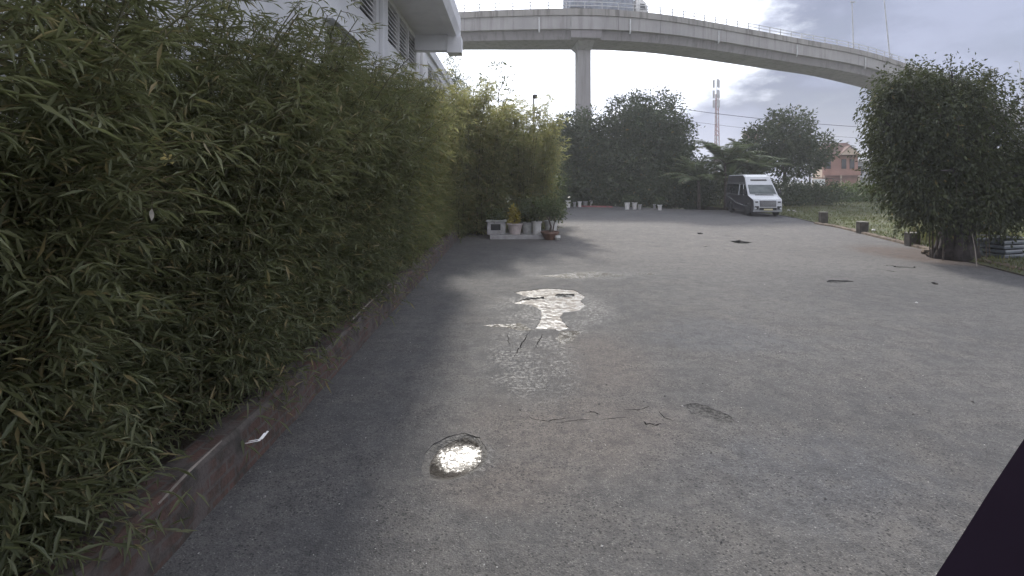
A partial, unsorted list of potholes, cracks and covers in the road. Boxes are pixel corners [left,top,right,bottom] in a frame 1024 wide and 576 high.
pothole [514,288,585,331]
pothole [684,403,734,423]
pothole [421,433,487,481]
